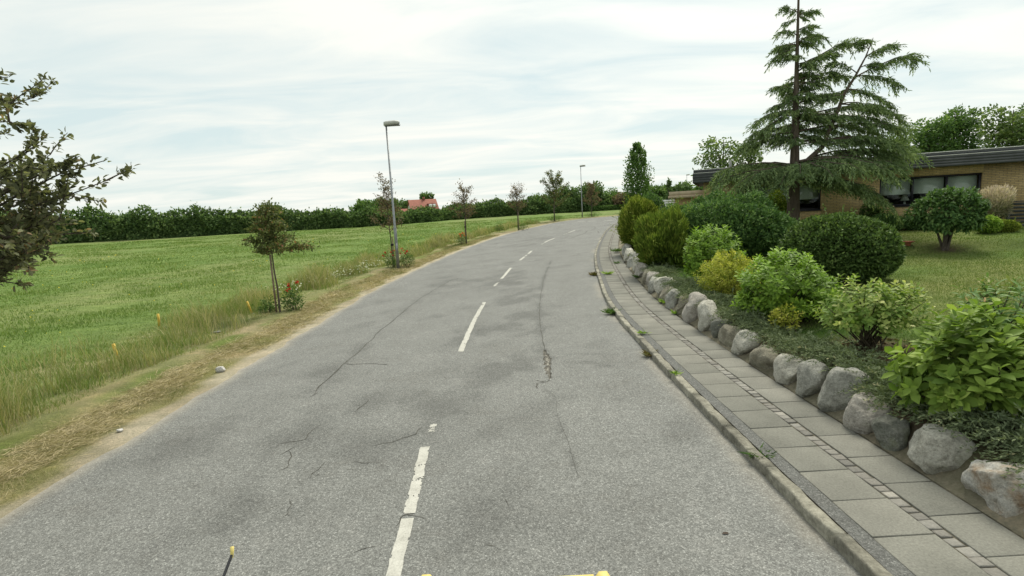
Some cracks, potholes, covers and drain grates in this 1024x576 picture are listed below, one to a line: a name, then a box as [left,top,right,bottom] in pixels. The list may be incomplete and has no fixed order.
crack [310,279,453,397]
